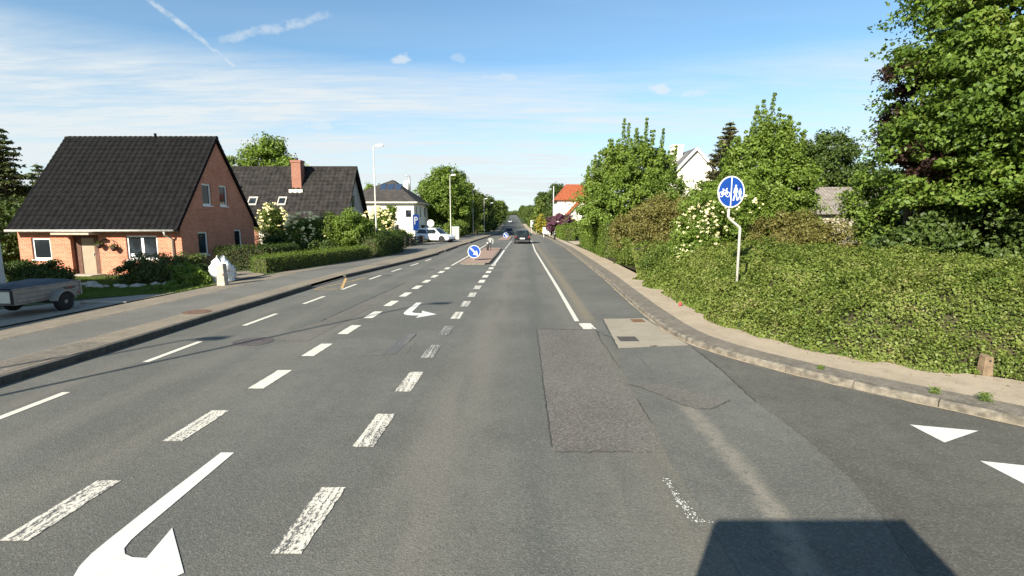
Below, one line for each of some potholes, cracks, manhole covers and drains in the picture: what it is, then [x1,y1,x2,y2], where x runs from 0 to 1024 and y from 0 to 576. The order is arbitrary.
manhole cover [232,337,274,346]
crack [629,346,756,421]
